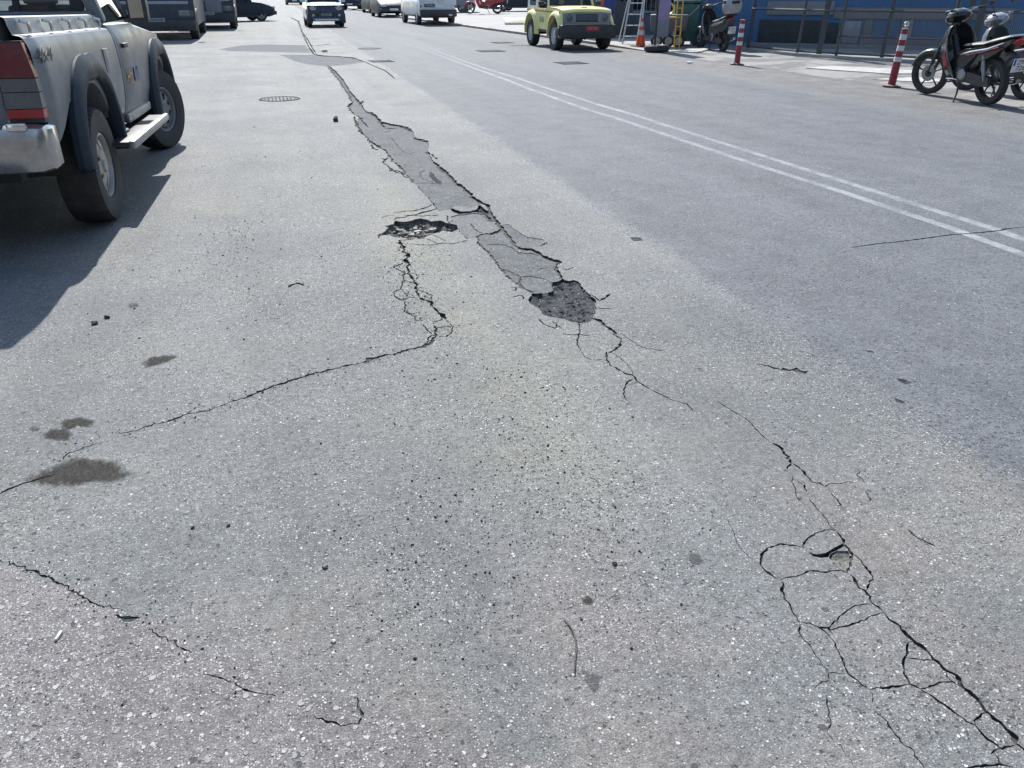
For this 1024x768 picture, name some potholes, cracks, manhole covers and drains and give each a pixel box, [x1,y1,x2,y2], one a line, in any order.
crack [314,697,364,726]
crack [718,401,1024,768]
pothole [381,218,459,239]
pothole [528,279,597,324]
crack [851,227,1023,248]
crack [0,476,50,494]
crack [539,289,693,411]
